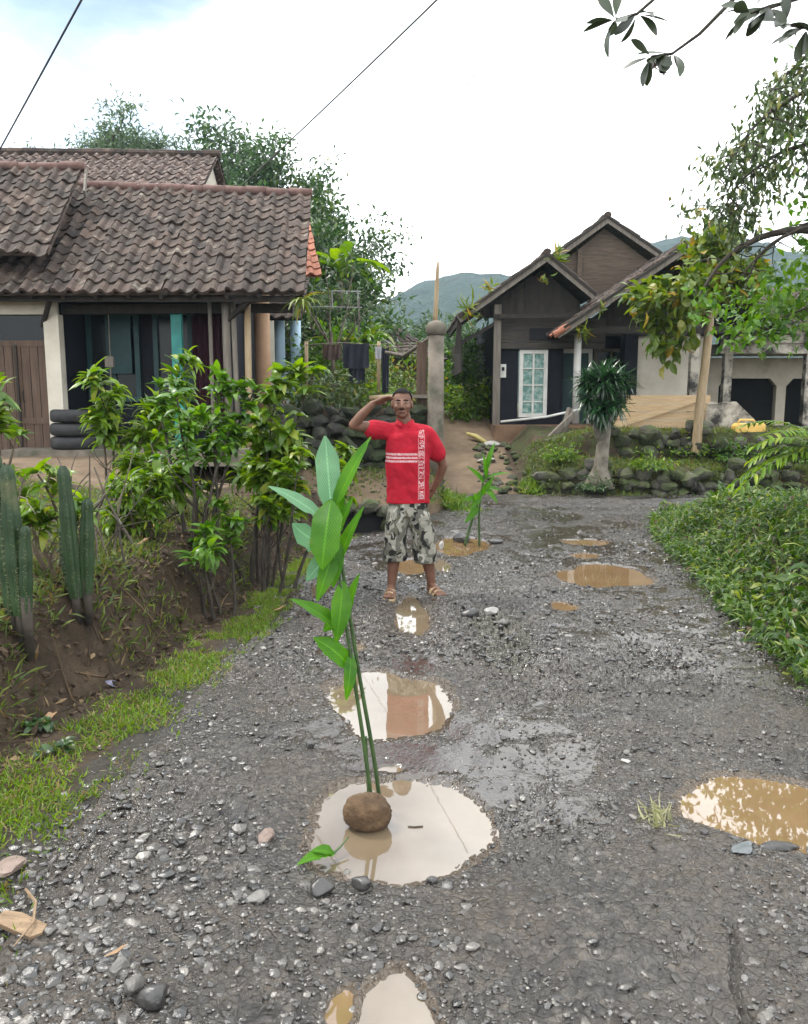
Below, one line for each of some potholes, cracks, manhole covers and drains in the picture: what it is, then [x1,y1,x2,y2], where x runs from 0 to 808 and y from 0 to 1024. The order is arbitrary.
pothole [393,592,433,636]
pothole [435,536,495,557]
pothole [297,772,502,887]
pothole [434,556,452,572]
pothole [398,557,424,575]
pothole [549,562,659,588]
crack [723,917,756,1024]
pothole [322,980,358,1024]
pothole [350,961,446,1024]
pothole [320,665,461,743]
pothole [549,600,581,611]
pothole [557,538,614,546]
